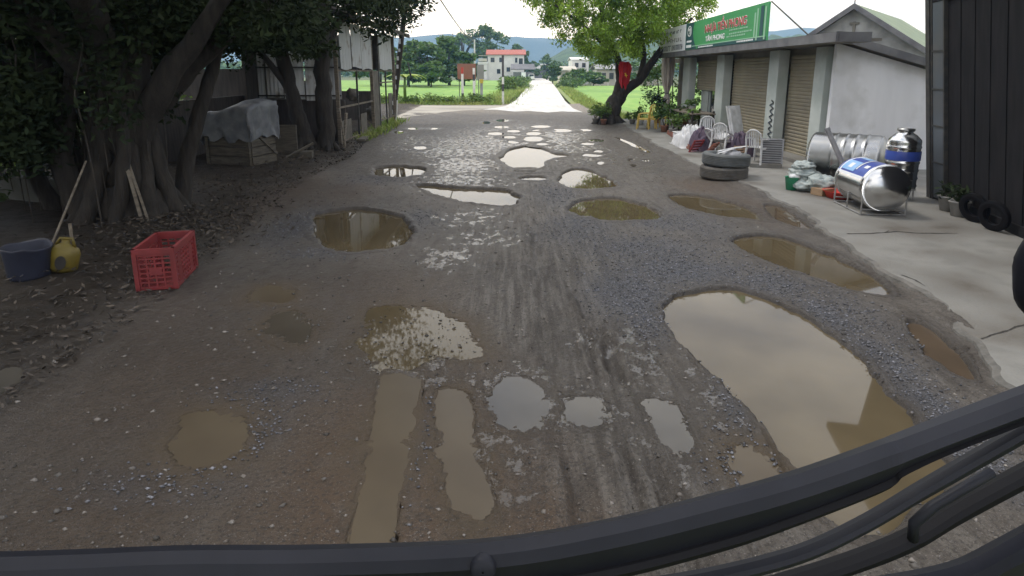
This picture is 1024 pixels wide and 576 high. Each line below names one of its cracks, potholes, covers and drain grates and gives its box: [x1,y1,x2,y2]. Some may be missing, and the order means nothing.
pothole [490,144,582,172]
pothole [152,403,262,478]
pothole [558,195,670,223]
pothole [657,284,969,547]
pothole [423,381,499,533]
pothole [632,393,706,465]
pothole [410,183,530,207]
pothole [302,206,423,255]
pothole [346,369,428,544]
pothole [663,192,776,223]
pothole [240,282,303,308]
pothole [756,202,817,232]
